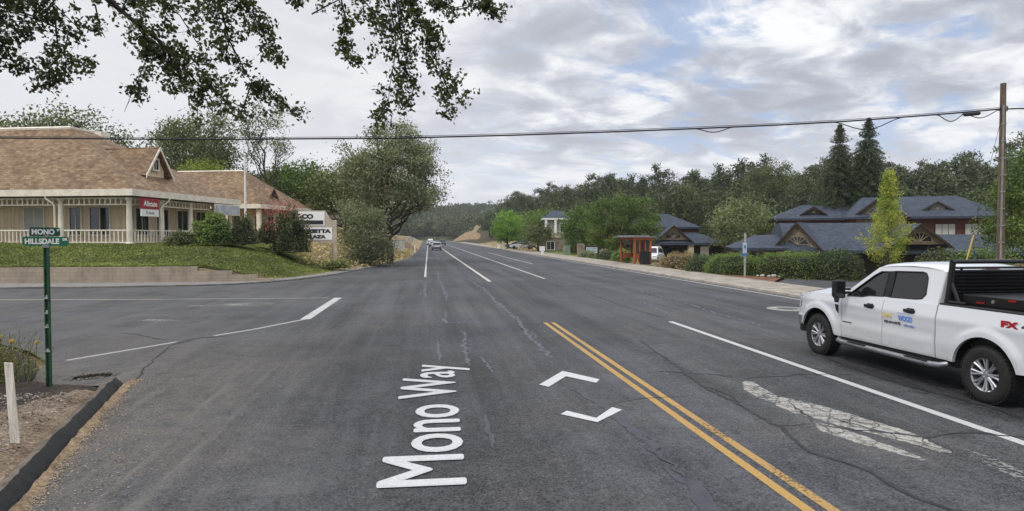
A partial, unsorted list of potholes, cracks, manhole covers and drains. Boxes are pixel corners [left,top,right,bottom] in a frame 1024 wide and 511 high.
crack [122,332,228,379]
pothole [63,371,121,381]
crack [611,340,1024,511]
